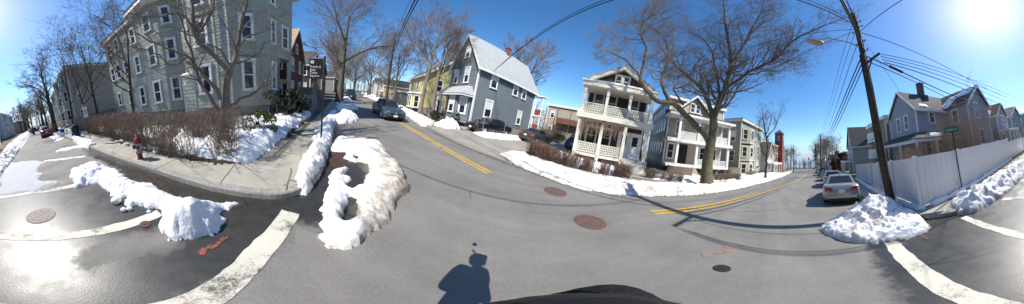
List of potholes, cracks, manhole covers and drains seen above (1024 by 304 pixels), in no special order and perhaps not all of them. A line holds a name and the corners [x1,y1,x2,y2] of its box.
manhole cover [544,187,567,197]
manhole cover [574,215,607,230]
manhole cover [26,208,56,224]
